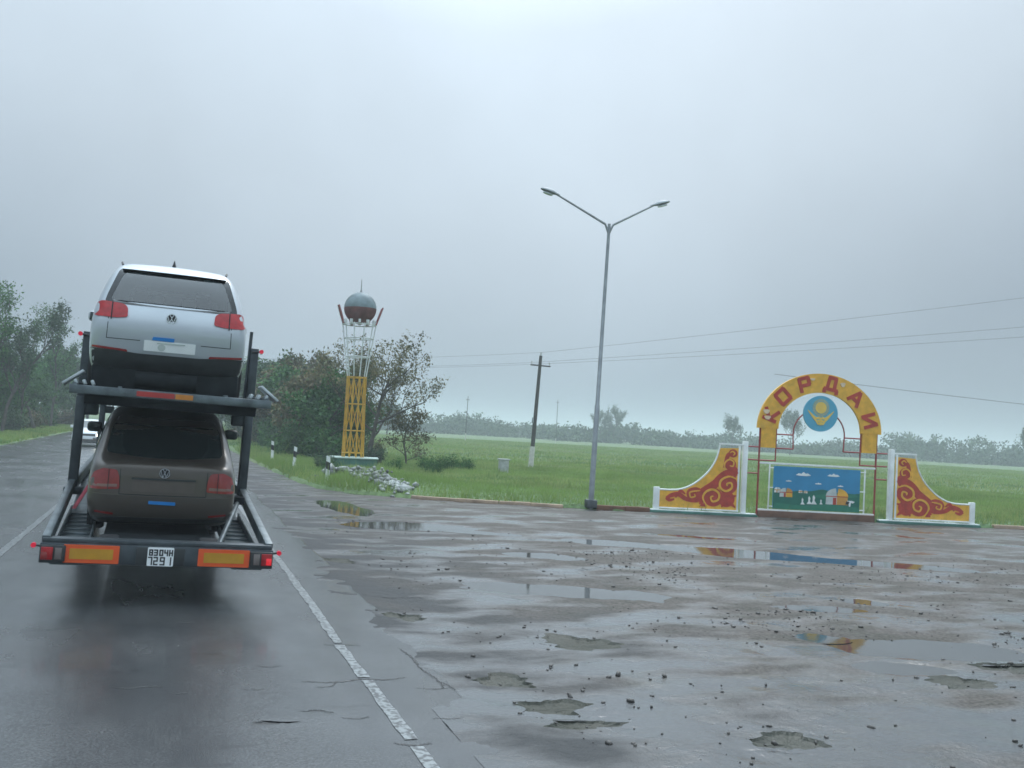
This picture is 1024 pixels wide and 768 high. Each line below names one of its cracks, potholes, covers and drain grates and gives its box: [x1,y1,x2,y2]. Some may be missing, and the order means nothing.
pothole [909,674,1013,693]
crack [302,648,455,690]
pothole [496,695,609,721]
pothole [372,611,436,624]
pothole [521,714,652,735]
pothole [530,631,637,654]
pothole [954,661,1024,677]
pothole [732,727,850,755]
pothole [456,670,547,691]
